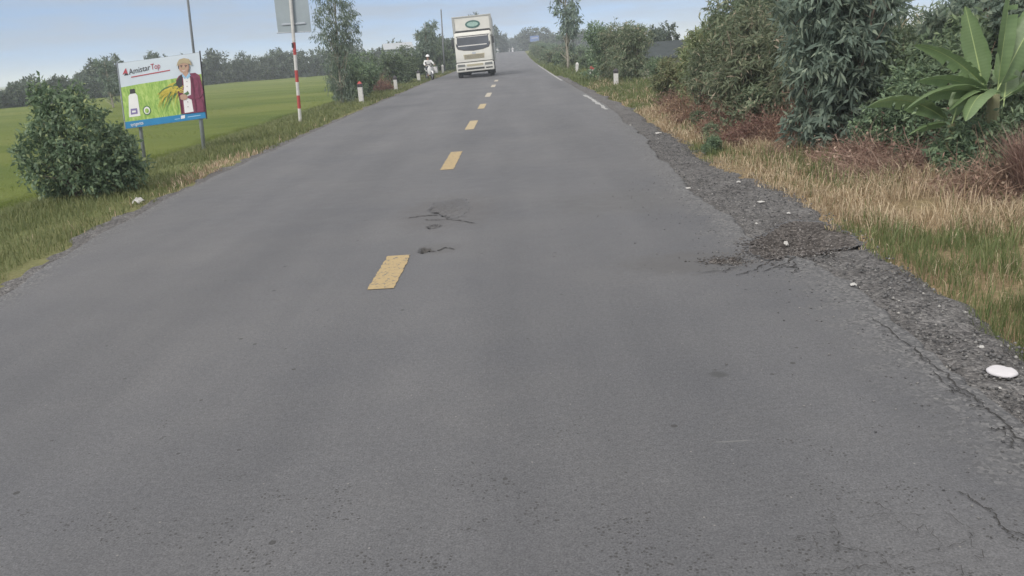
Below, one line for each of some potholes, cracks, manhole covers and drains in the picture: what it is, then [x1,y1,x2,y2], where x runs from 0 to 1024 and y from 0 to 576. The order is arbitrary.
pothole [726,214,865,266]
crack [870,316,1024,449]
crack [786,491,1024,576]
pothole [427,198,472,219]
